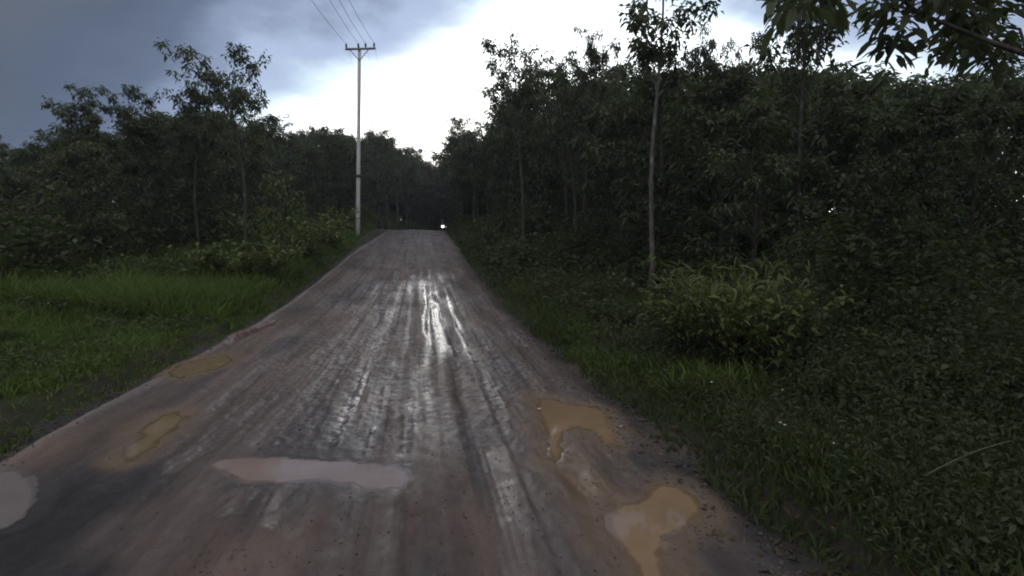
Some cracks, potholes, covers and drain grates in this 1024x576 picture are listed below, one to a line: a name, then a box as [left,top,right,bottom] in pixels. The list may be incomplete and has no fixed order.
pothole [0,464,53,533]
pothole [108,409,196,466]
pothole [161,353,239,380]
pothole [195,450,423,495]
pothole [528,395,628,471]
pothole [593,478,716,576]
